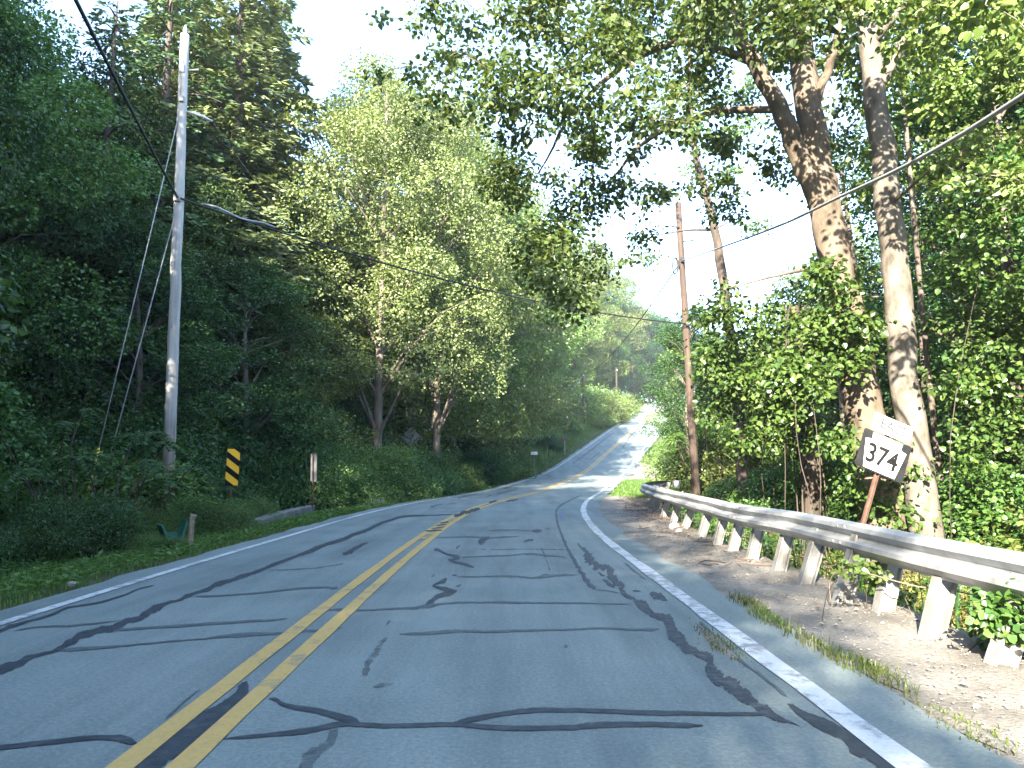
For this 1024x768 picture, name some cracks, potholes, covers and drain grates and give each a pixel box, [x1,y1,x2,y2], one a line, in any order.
crack [0,563,659,651]
crack [223,697,769,768]
